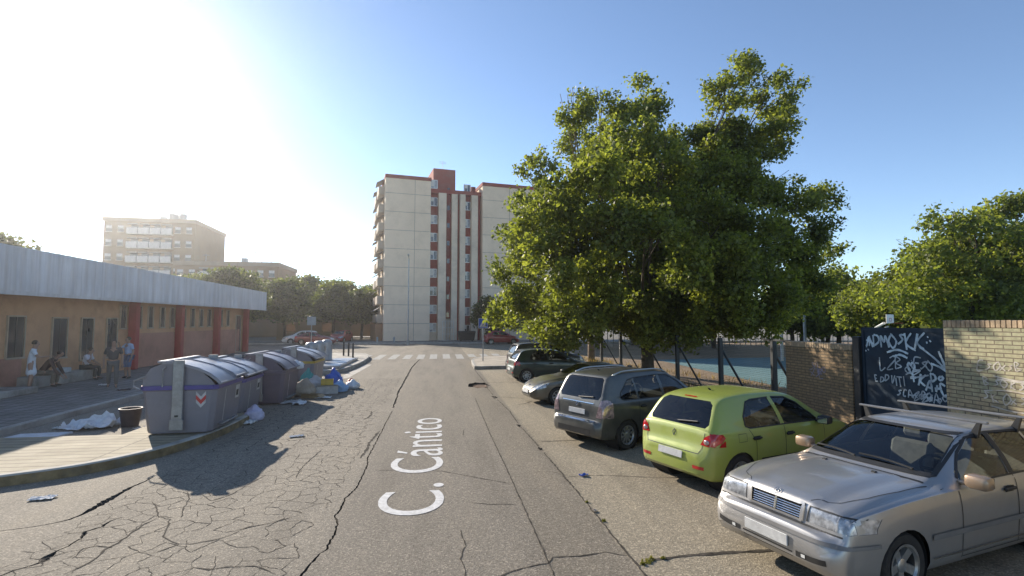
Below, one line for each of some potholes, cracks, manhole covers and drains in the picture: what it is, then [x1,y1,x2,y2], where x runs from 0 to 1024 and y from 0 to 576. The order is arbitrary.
crack [0,360,419,576]
crack [501,552,627,576]
